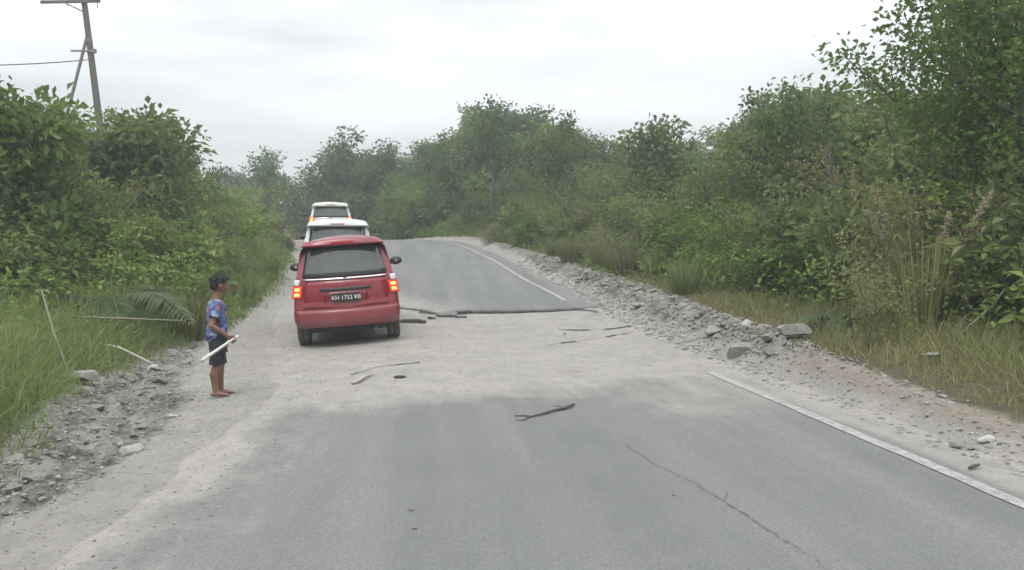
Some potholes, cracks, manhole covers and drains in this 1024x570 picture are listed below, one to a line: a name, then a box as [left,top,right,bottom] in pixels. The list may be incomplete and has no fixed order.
crack [626,444,832,570]
